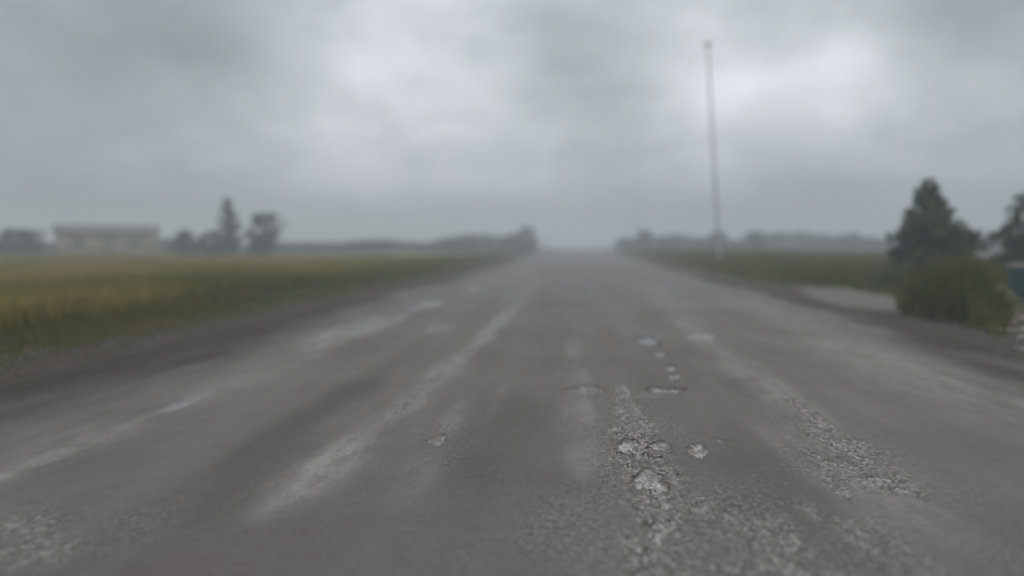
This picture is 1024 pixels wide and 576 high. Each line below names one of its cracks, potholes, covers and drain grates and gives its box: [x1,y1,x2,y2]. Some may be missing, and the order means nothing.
pothole [624,333,669,349]
pothole [670,435,728,466]
pothole [600,432,658,461]
pothole [552,381,620,402]
pothole [632,434,678,457]
pothole [611,462,693,501]
crack [595,383,946,576]
pothole [631,384,710,396]
